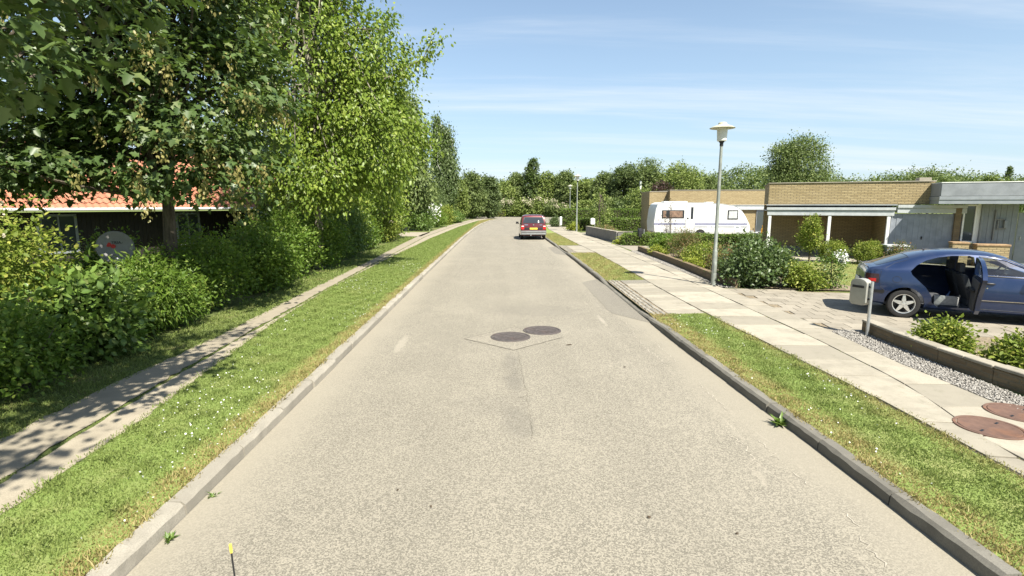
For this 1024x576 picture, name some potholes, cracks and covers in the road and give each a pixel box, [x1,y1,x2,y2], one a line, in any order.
manhole cover [952,415,1024,440]
manhole cover [491,332,531,342]
manhole cover [523,326,561,335]
manhole cover [982,402,1024,422]
